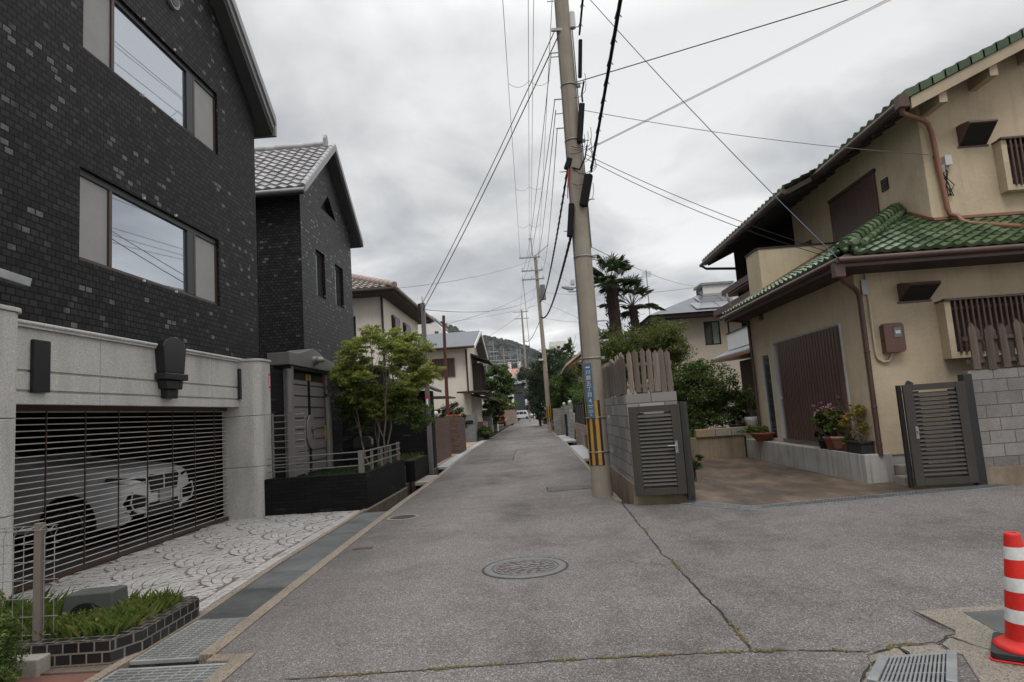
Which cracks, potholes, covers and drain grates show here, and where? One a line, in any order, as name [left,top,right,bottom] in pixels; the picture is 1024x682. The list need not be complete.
drain grate [129,617,247,667]
drain grate [98,663,226,682]
drain grate [867,649,958,682]
manhole cover [482,557,569,579]
